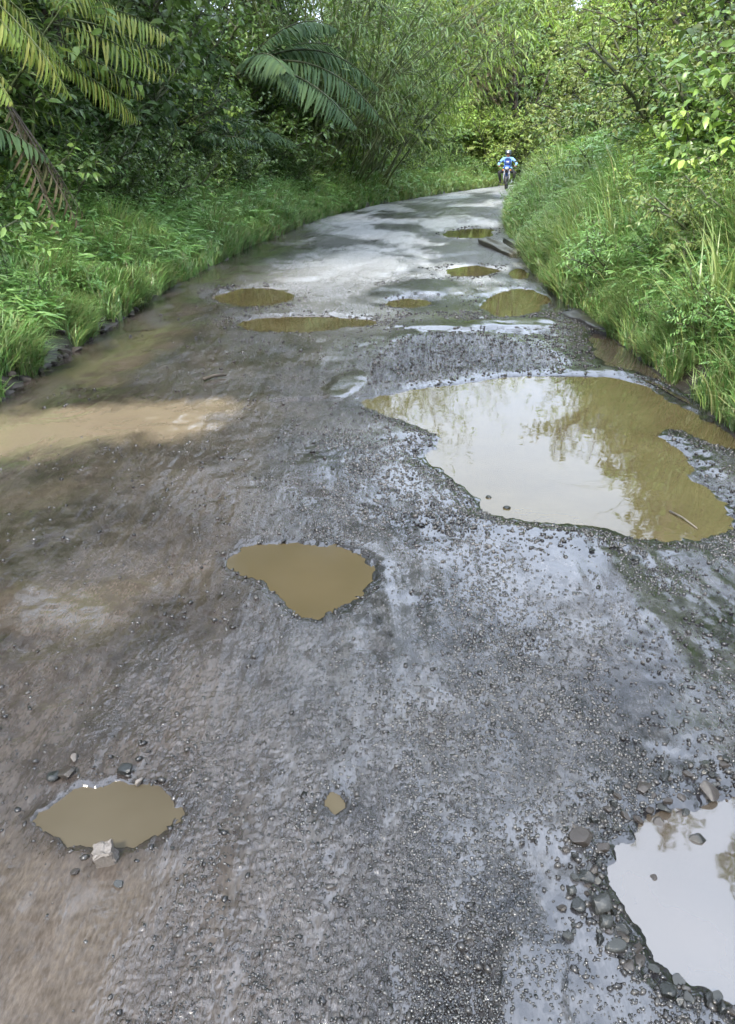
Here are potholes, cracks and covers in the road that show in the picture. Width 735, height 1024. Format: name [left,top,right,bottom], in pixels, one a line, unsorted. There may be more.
pothole [25,775,193,850]
pothole [585,779,735,1024]
pothole [504,266,536,279]
pothole [216,537,384,621]
pothole [232,312,385,333]
